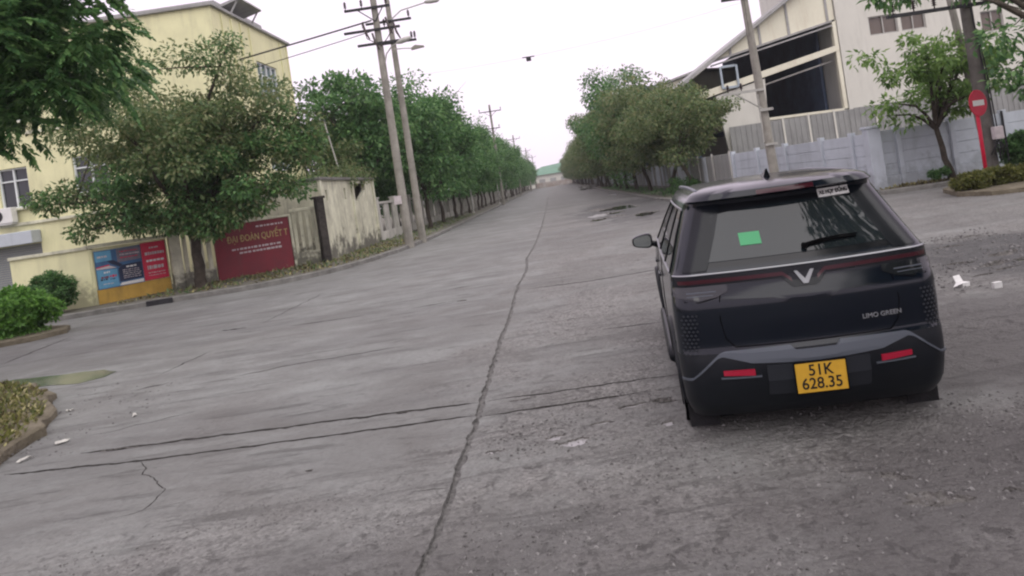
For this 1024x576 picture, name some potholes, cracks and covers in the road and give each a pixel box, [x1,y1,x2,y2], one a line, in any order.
crack [4,403,472,519]
pothole [598,204,640,212]
